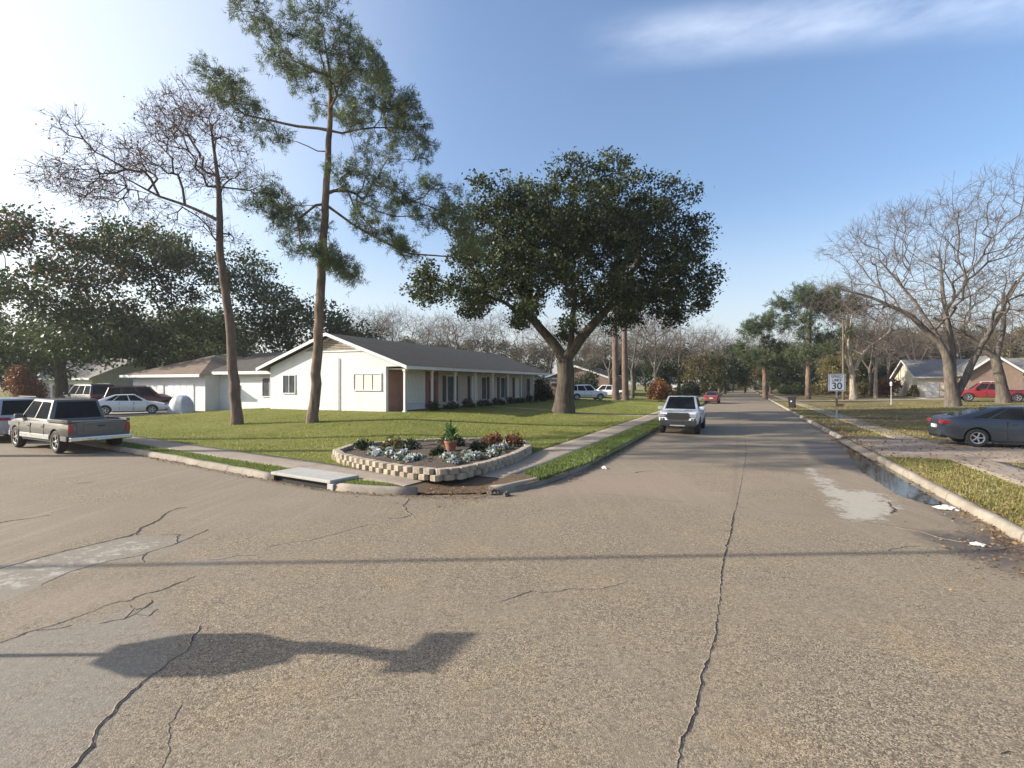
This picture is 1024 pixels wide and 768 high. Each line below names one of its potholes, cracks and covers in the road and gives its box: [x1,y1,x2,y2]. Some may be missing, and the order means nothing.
crack [0,525,366,768]
crack [607,442,981,768]
crack [502,583,623,601]
crack [0,507,209,585]
crack [390,498,416,519]
drain grate [269,467,359,491]
